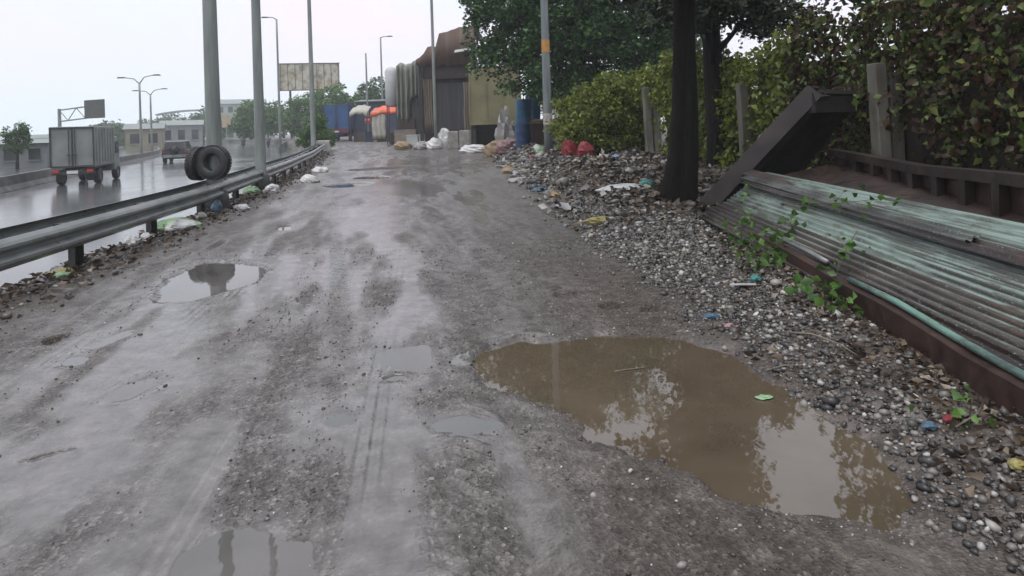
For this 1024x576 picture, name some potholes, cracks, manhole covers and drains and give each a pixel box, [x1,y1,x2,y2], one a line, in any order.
pothole [142,258,278,305]
pothole [414,404,510,448]
pothole [454,325,961,554]
pothole [161,513,362,576]
pothole [341,333,464,385]
pothole [301,403,375,438]
